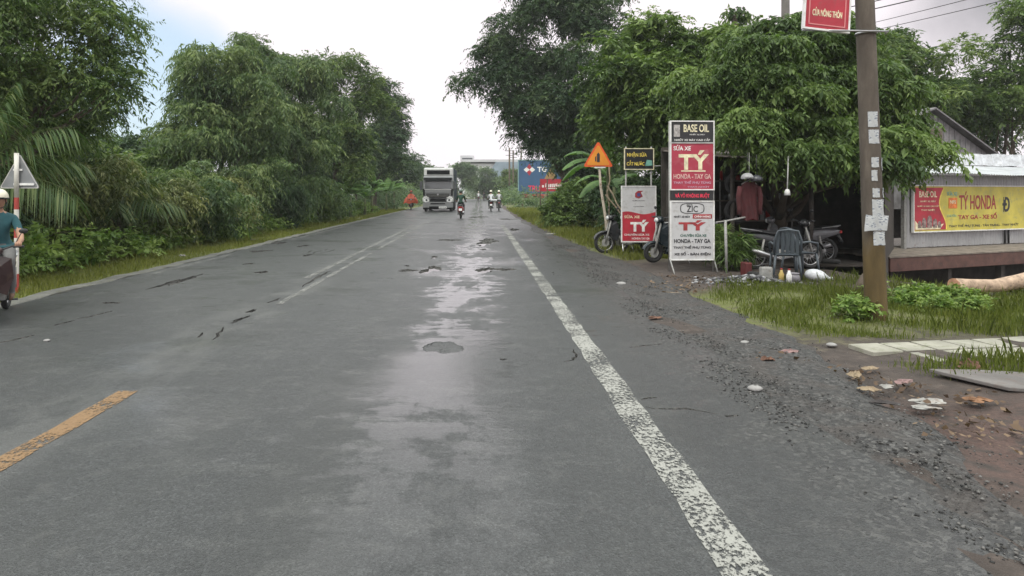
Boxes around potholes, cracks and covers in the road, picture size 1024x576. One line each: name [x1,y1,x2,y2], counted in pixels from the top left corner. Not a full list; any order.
pothole [422,341,464,354]
crack [56,311,111,325]
crack [641,397,739,417]
